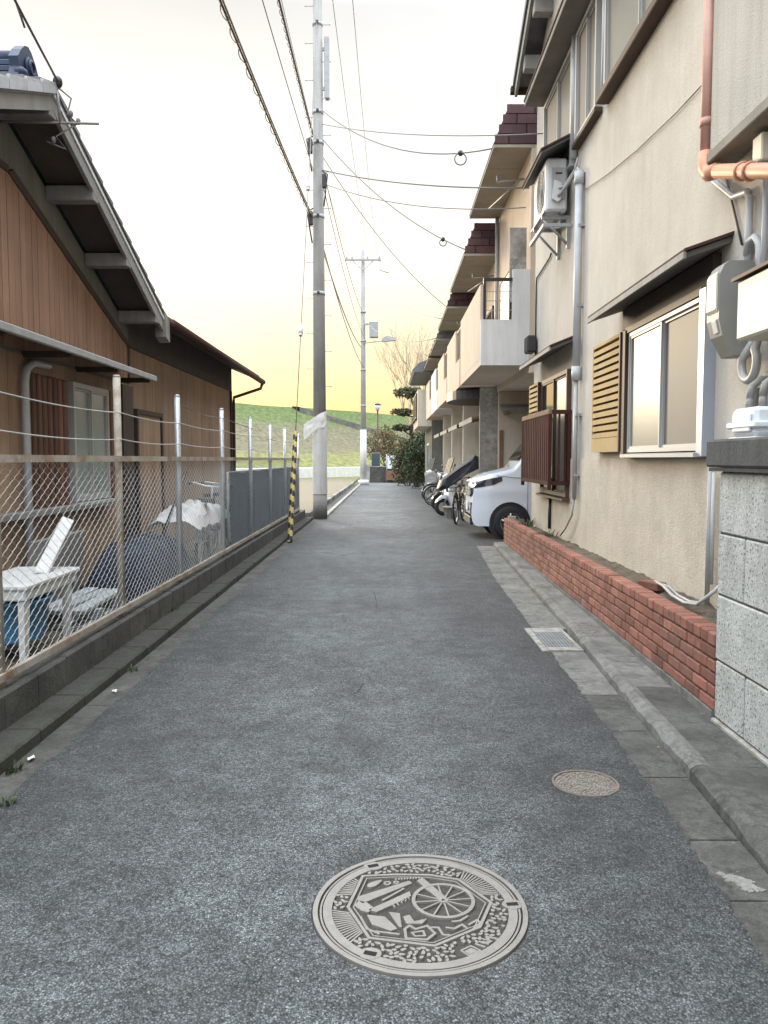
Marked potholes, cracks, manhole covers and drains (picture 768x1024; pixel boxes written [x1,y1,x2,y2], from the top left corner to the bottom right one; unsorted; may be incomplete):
manhole cover [311,854,530,979]
drain grate [525,628,584,652]
manhole cover [552,770,620,797]
